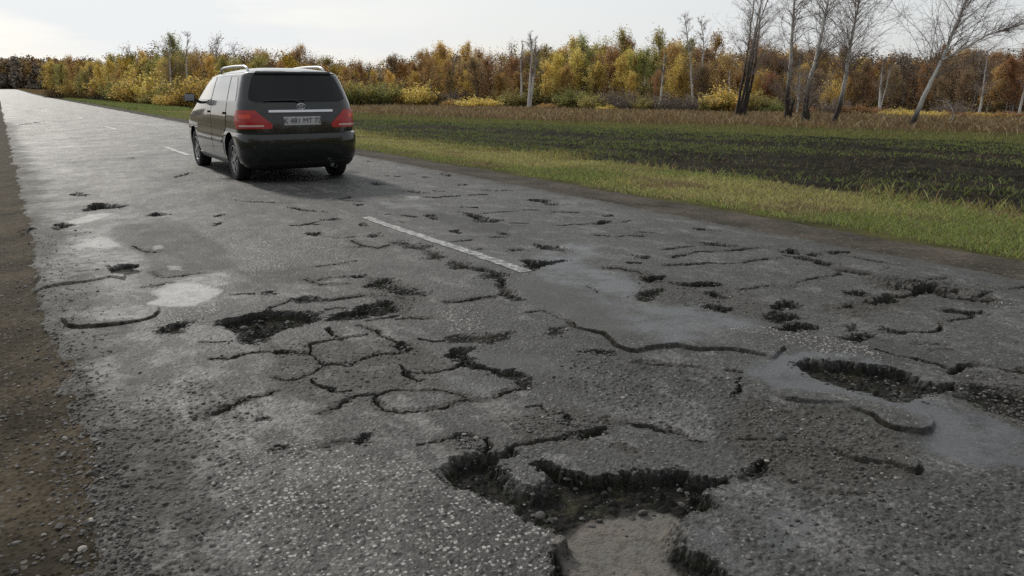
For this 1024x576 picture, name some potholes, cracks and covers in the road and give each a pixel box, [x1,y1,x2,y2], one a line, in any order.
pothole [758,310,803,325]
pothole [212,309,326,345]
pothole [788,357,966,403]
pothole [74,202,131,213]
pothole [767,298,804,311]
pothole [771,321,831,333]
crack [194,161,1024,421]
pothole [945,381,1024,424]
pothole [429,448,736,576]
